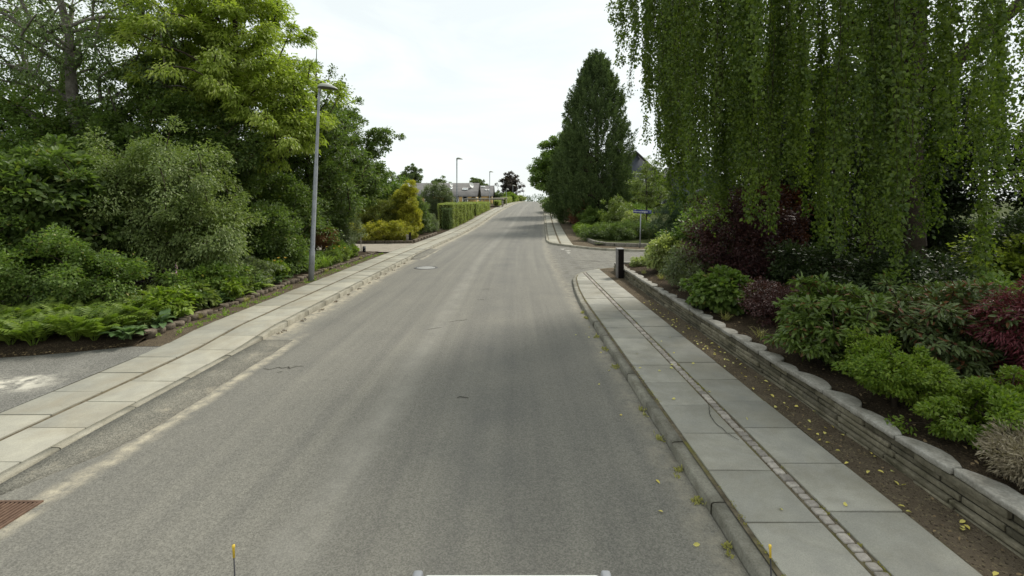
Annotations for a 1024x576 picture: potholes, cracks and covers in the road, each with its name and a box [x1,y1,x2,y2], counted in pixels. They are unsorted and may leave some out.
drain grate [0,500,44,529]
